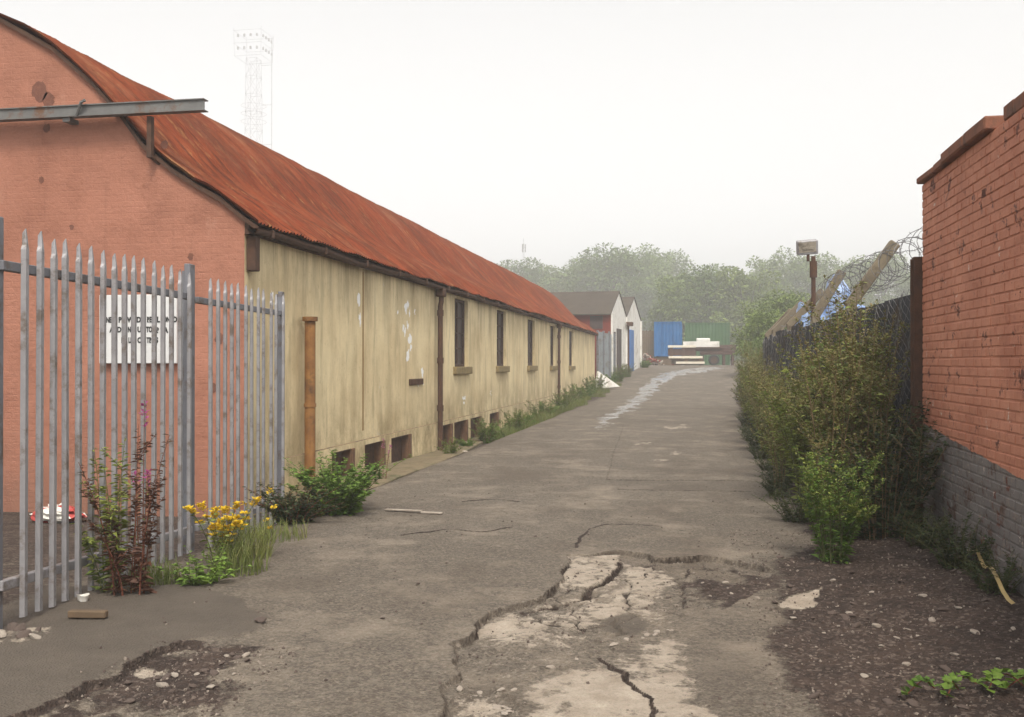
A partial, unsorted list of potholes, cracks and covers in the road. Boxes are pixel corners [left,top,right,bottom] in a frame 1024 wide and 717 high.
pothole [9,641,255,717]
crack [574,524,661,548]
crack [401,527,512,536]
pothole [440,551,776,717]
crack [598,658,657,717]
